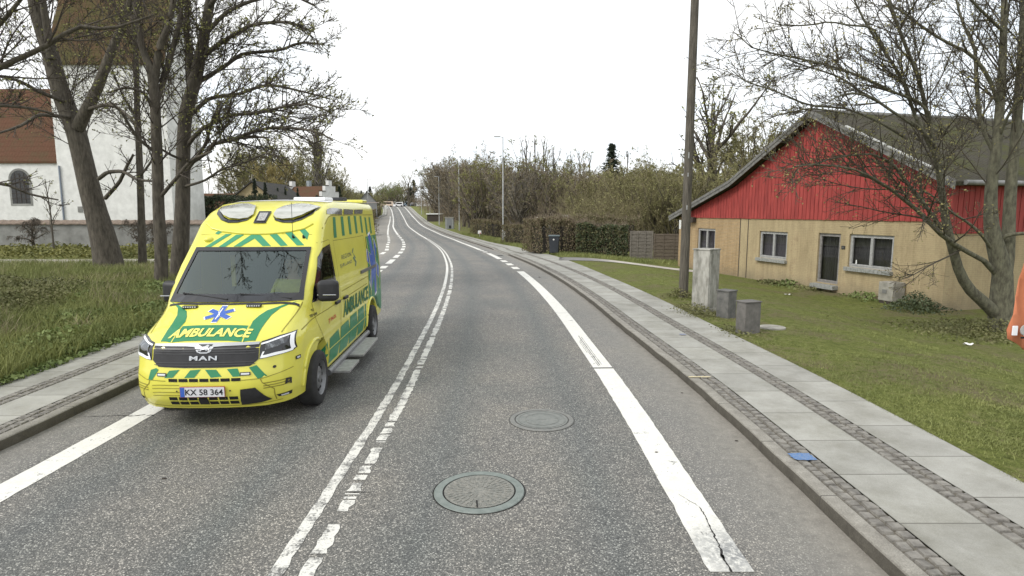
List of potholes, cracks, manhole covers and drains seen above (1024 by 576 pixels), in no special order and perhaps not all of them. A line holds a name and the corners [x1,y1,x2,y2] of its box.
manhole cover [433,471,526,514]
manhole cover [509,409,575,432]
crack [679,494,732,572]
